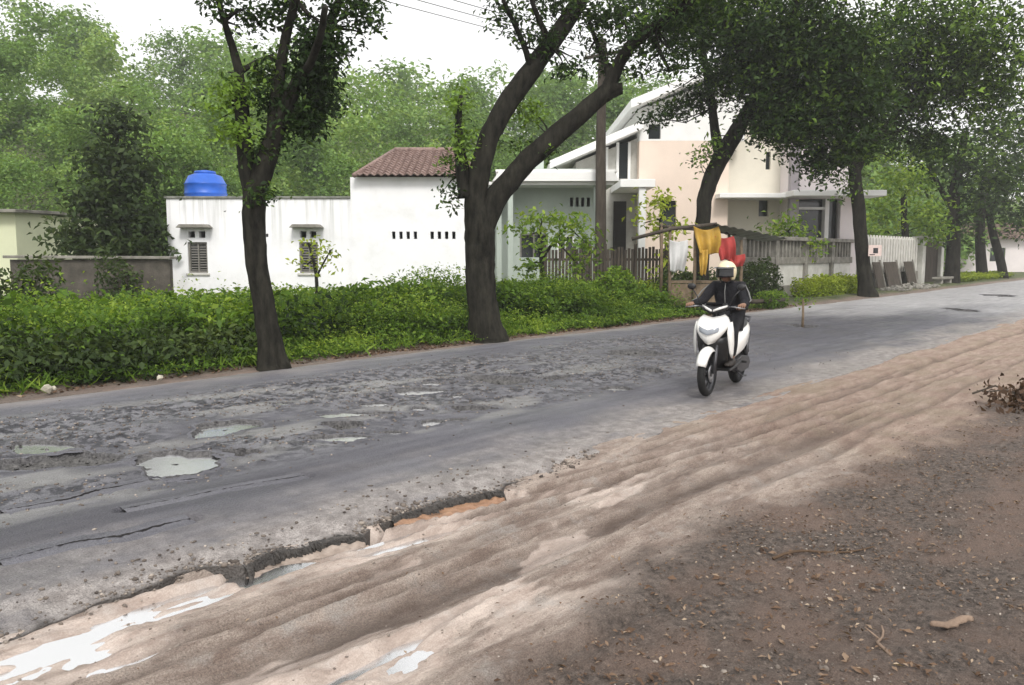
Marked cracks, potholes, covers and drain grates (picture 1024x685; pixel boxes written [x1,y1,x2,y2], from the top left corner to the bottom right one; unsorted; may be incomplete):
pothole [391,489,507,527]
pothole [114,449,235,482]
crack [0,473,309,566]
pothole [298,433,378,443]
pothole [0,448,137,472]
pothole [186,418,268,439]
pothole [0,439,92,457]
pothole [418,418,447,427]
pothole [389,386,451,397]
pothole [242,533,369,579]
